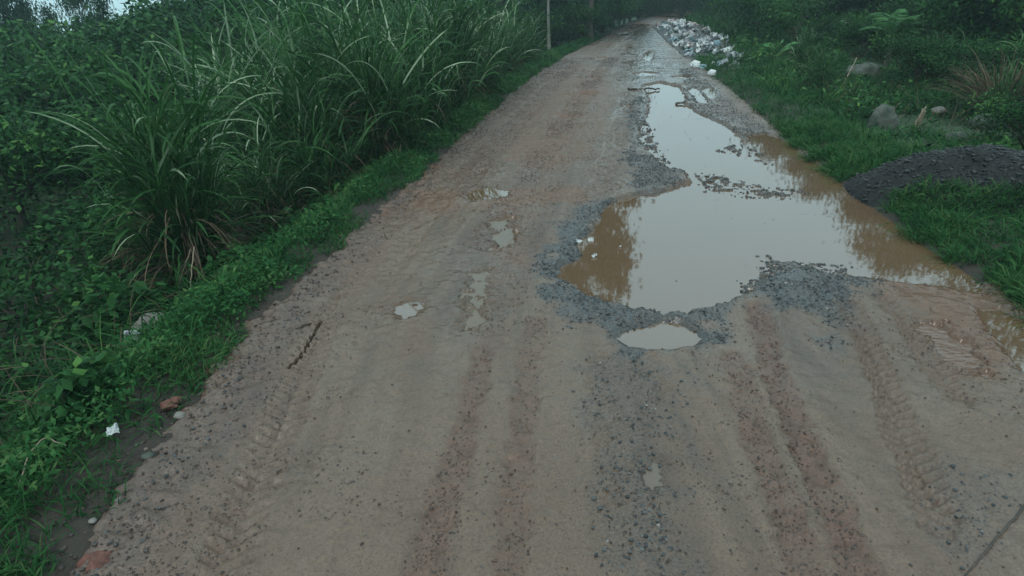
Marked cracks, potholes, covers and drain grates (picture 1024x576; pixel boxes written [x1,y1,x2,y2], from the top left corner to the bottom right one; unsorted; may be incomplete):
pothole [461,184,510,201]
pothole [634,457,671,493]
pothole [389,298,428,319]
pothole [551,81,991,315]
